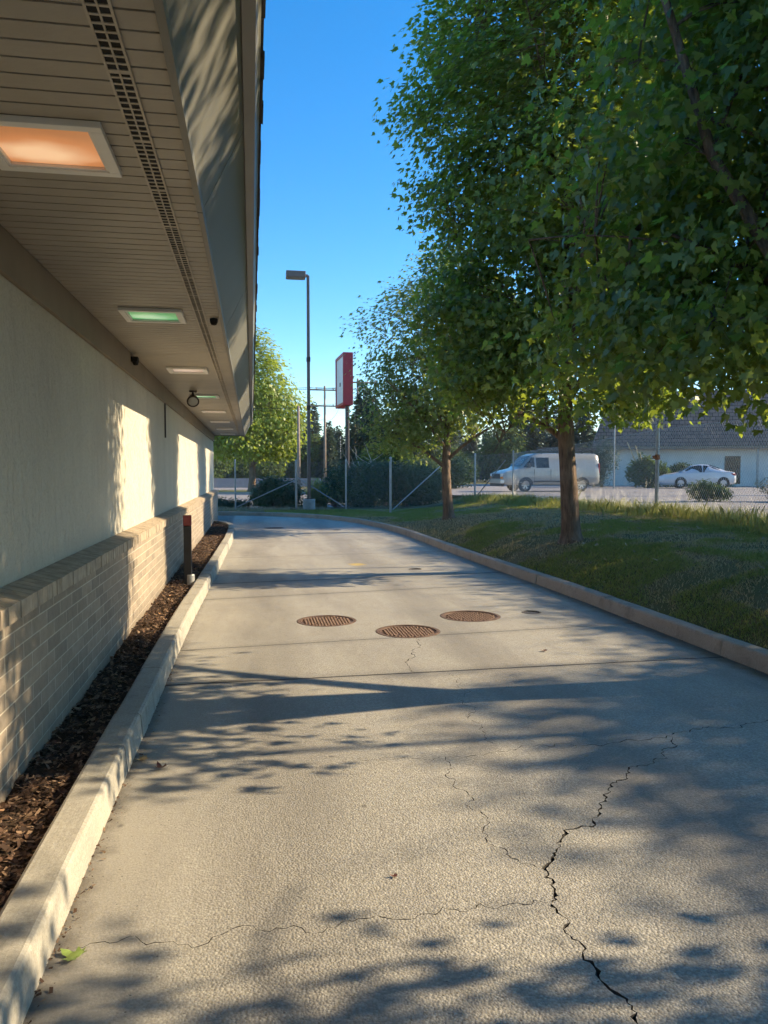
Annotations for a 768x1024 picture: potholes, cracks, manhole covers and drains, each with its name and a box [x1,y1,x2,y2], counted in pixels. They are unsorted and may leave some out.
crack [82,720,768,1024]
manhole cover [440,610,500,622]
manhole cover [376,625,440,638]
manhole cover [297,615,356,627]
